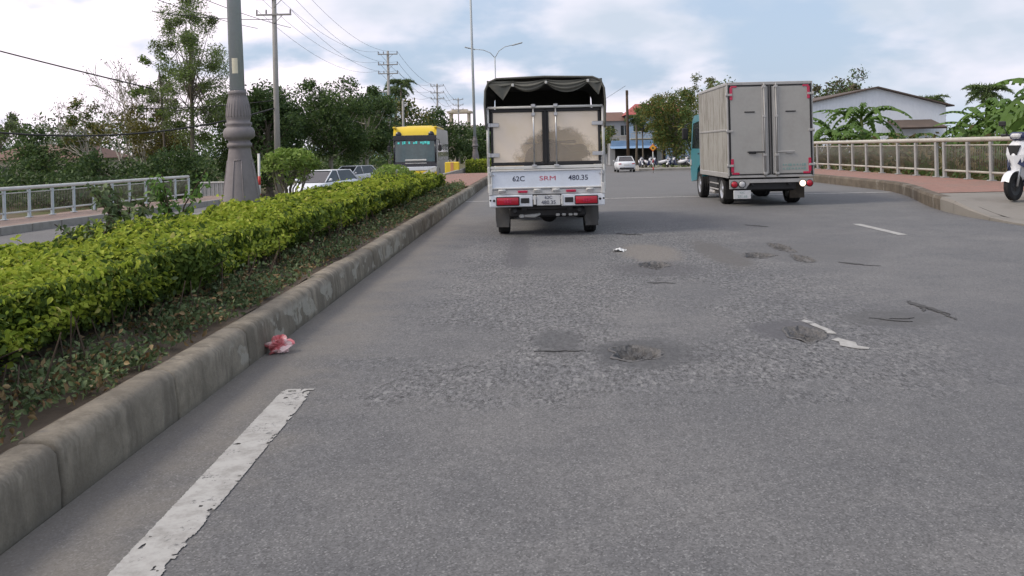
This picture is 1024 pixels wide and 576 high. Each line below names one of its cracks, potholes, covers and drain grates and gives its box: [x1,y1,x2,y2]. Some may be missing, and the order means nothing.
pothole [636,261,672,269]
pothole [781,325,828,344]
pothole [608,344,665,362]
pothole [790,254,818,263]
crack [877,301,957,322]
